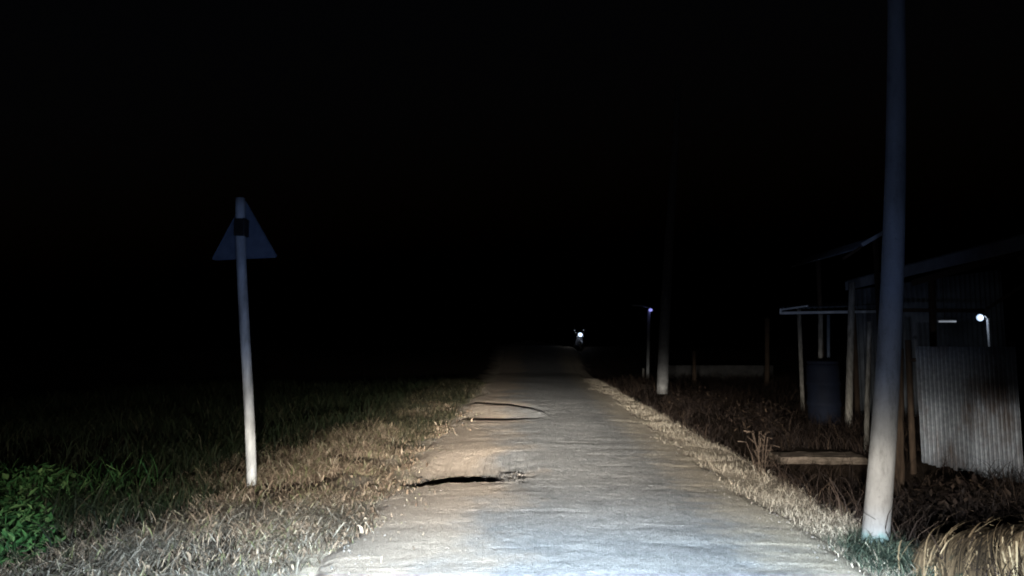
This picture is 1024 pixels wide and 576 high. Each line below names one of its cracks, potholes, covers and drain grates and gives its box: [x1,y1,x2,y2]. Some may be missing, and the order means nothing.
pothole [393,446,542,489]
pothole [458,400,550,422]
